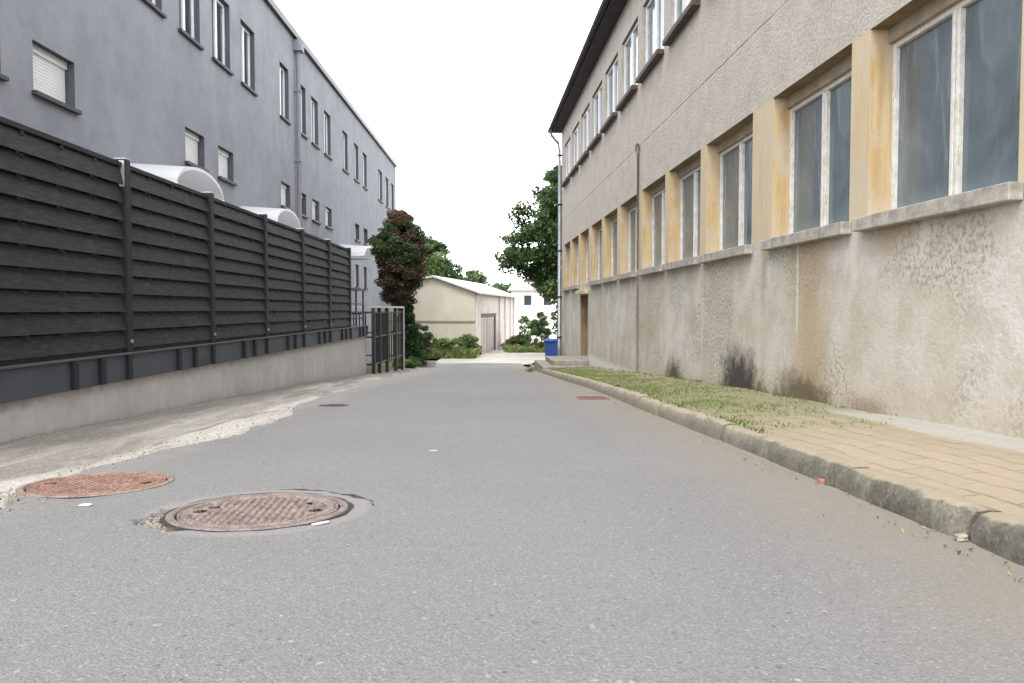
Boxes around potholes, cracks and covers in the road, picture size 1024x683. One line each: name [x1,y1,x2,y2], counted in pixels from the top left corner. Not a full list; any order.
manhole cover [15,471,175,498]
manhole cover [160,492,354,532]
